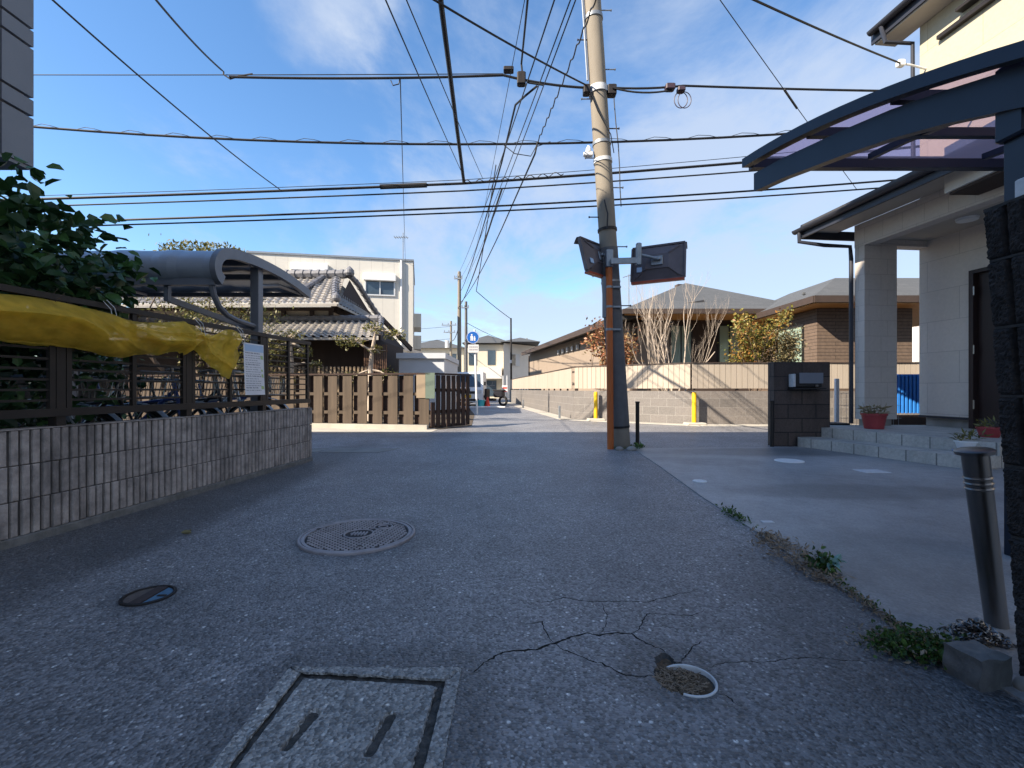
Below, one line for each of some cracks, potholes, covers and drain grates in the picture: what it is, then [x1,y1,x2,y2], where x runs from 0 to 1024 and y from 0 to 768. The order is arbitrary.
manhole cover [209,666,462,768]
pothole [653,653,719,695]
crack [474,591,704,677]
manhole cover [118,585,177,607]
manhole cover [297,518,415,556]
